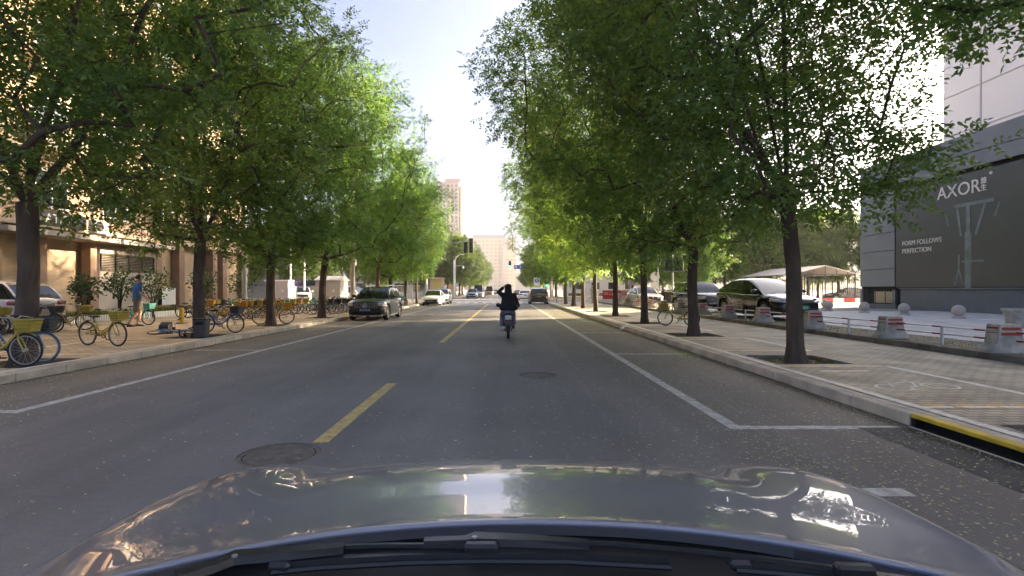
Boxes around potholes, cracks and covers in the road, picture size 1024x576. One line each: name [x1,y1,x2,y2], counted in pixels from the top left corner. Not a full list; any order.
manhole cover [235,443,321,467]
